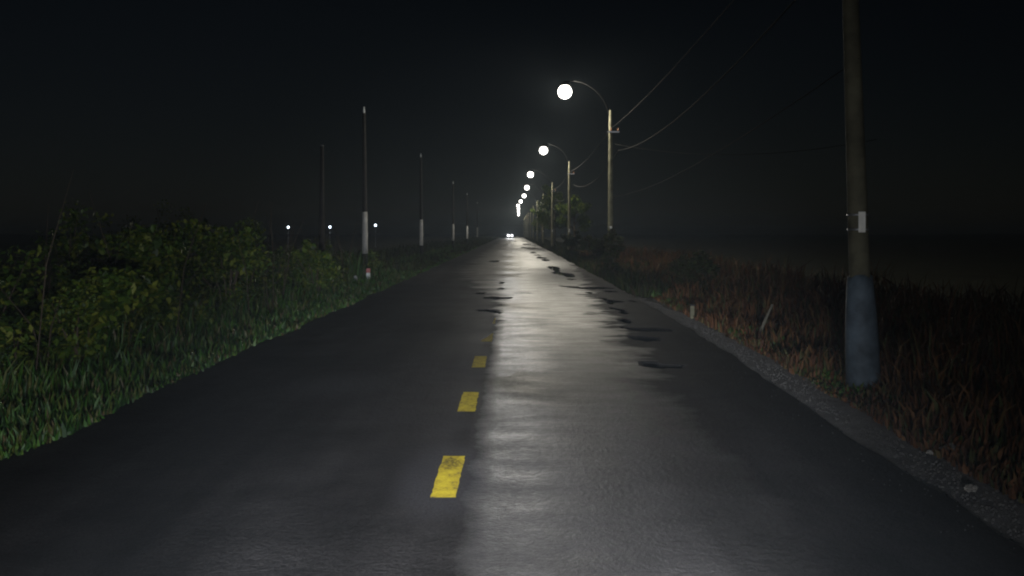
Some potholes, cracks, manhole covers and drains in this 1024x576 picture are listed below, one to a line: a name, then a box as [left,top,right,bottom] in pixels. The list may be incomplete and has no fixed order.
pothole [637,361,688,369]
pothole [547,266,575,277]
